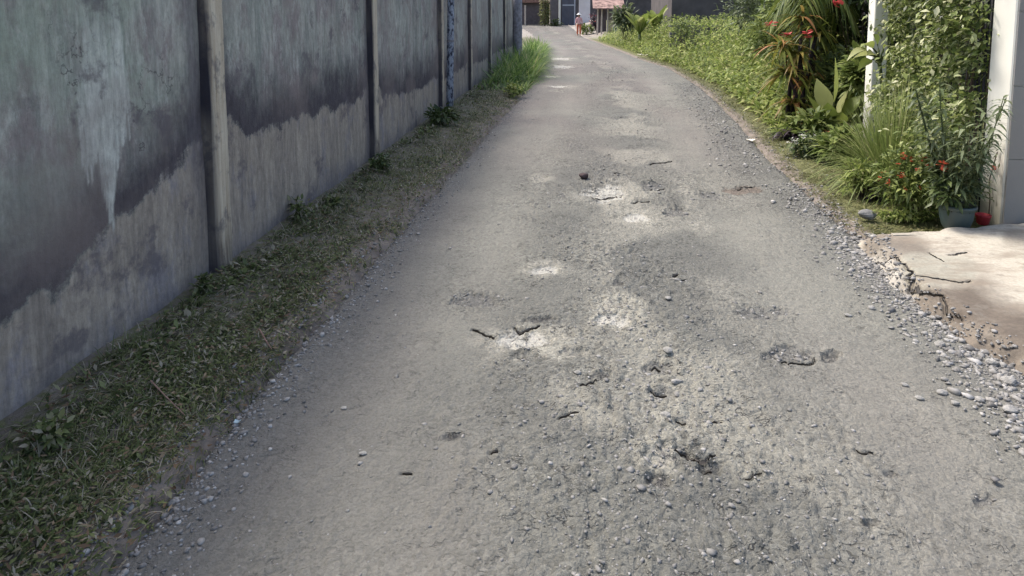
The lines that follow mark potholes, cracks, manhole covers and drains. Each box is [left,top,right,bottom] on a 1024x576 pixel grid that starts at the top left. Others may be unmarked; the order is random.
crack [876,252,971,321]
pothole [695,459,724,476]
pothole [441,431,467,441]
pothole [486,328,563,352]
pothole [719,184,765,195]
crack [592,188,665,204]
pothole [642,383,684,405]
pothole [819,348,844,363]
pothole [760,342,818,364]
